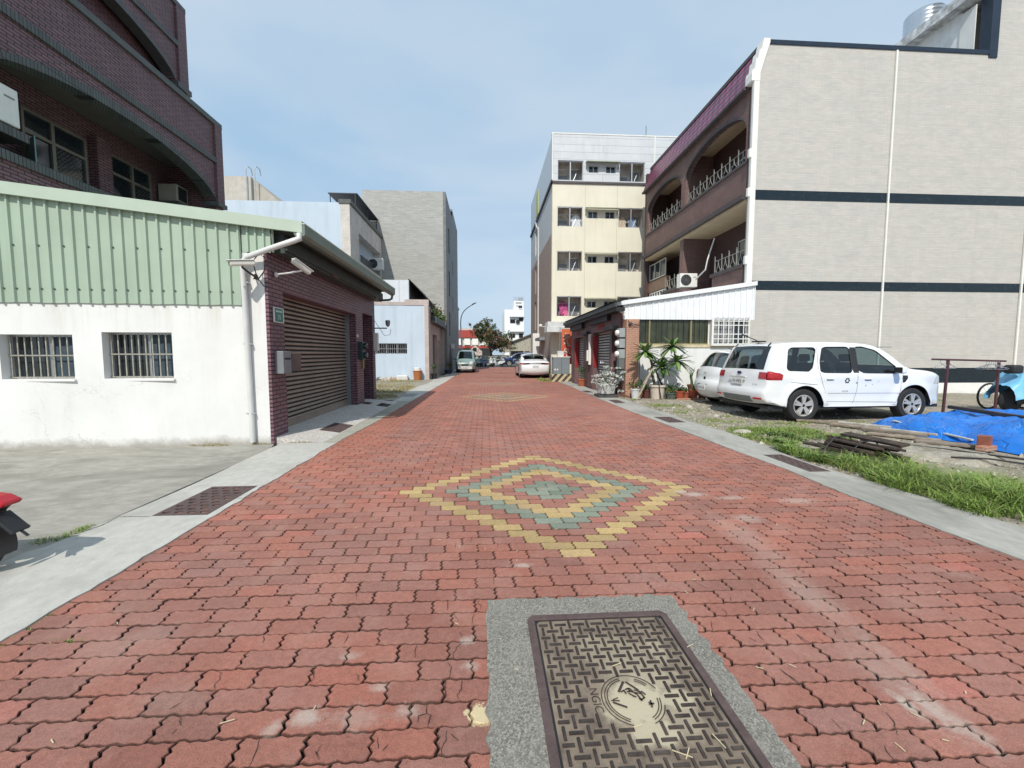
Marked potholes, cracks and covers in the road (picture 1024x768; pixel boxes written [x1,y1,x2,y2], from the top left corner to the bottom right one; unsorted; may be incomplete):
drain grate [765,454,829,472]
drain grate [153,486,257,516]
manhole cover [527,610,773,768]
